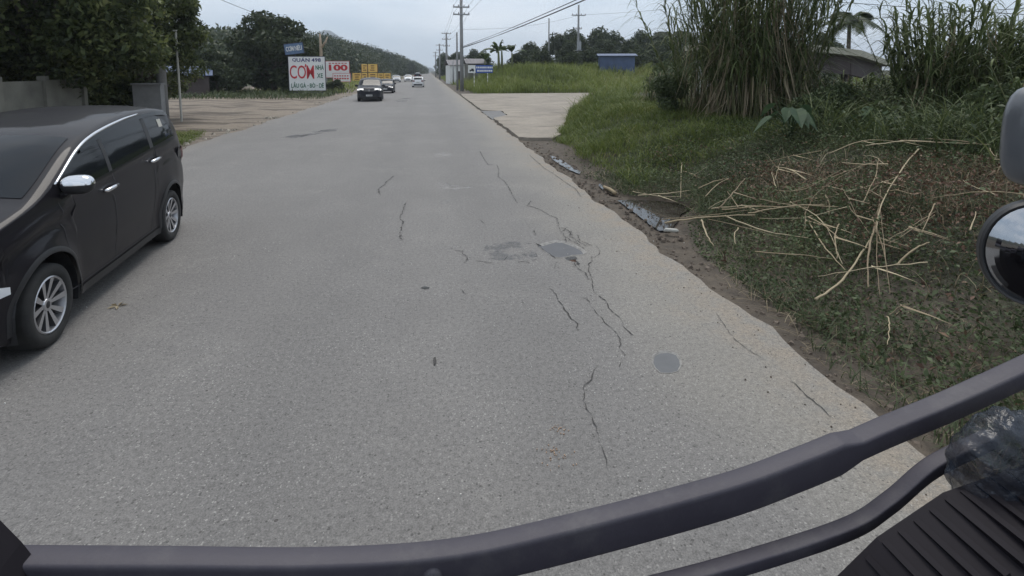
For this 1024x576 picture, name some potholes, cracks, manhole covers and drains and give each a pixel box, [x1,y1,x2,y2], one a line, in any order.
crack [479,151,633,367]
crack [451,248,491,263]
crack [377,176,407,240]
crack [583,366,607,466]
